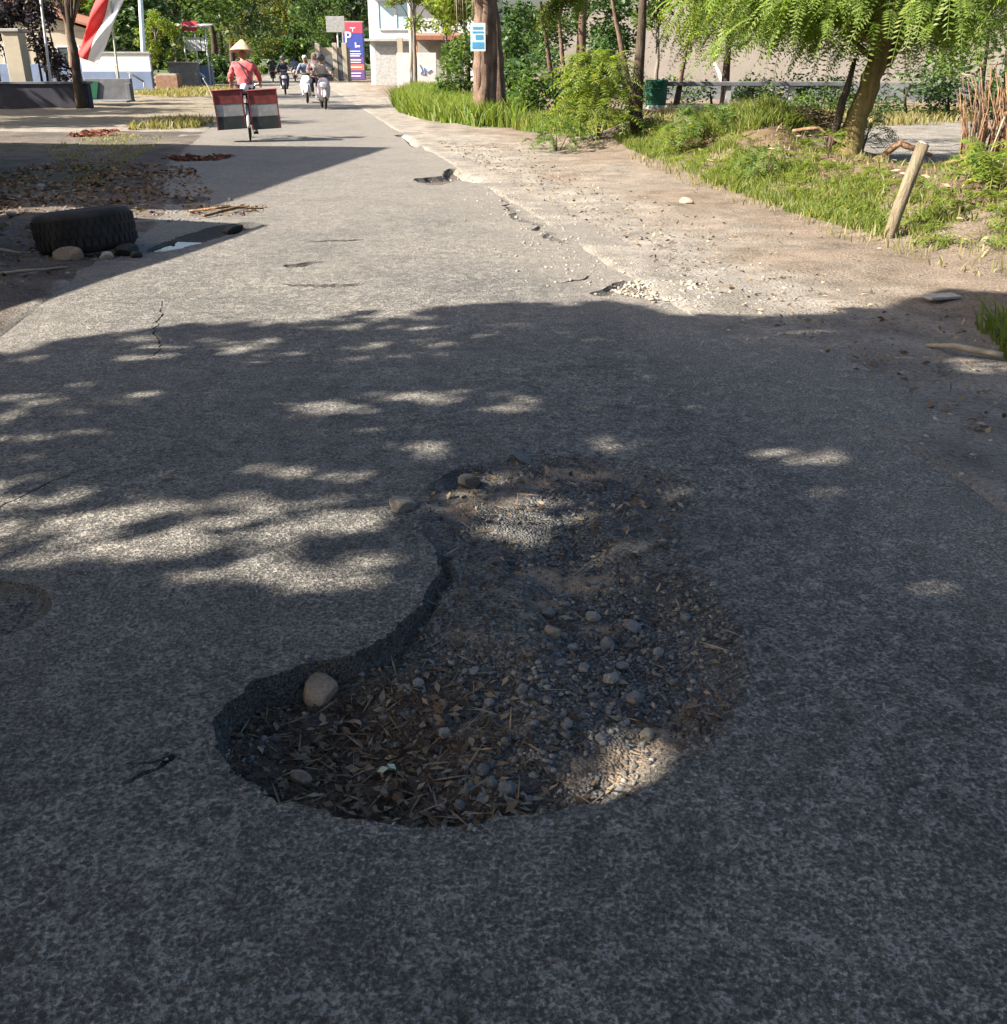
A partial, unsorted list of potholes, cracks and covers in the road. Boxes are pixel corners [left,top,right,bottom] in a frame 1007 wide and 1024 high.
pothole [145,222,262,252]
pothole [414,169,462,185]
crack [502,198,570,244]
pothole [211,454,752,828]
crack [0,466,95,507]
crack [125,753,178,783]
pothole [589,281,637,297]
crack [152,301,165,356]
